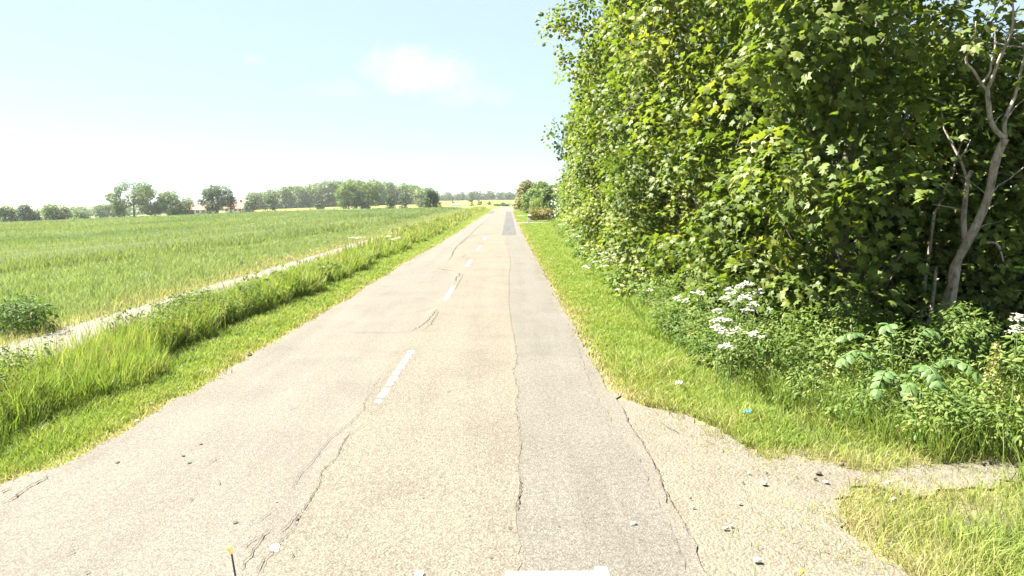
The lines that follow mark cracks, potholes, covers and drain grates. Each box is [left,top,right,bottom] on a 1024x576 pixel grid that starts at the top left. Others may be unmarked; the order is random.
crack [621,405,689,536]
crack [241,379,379,573]
